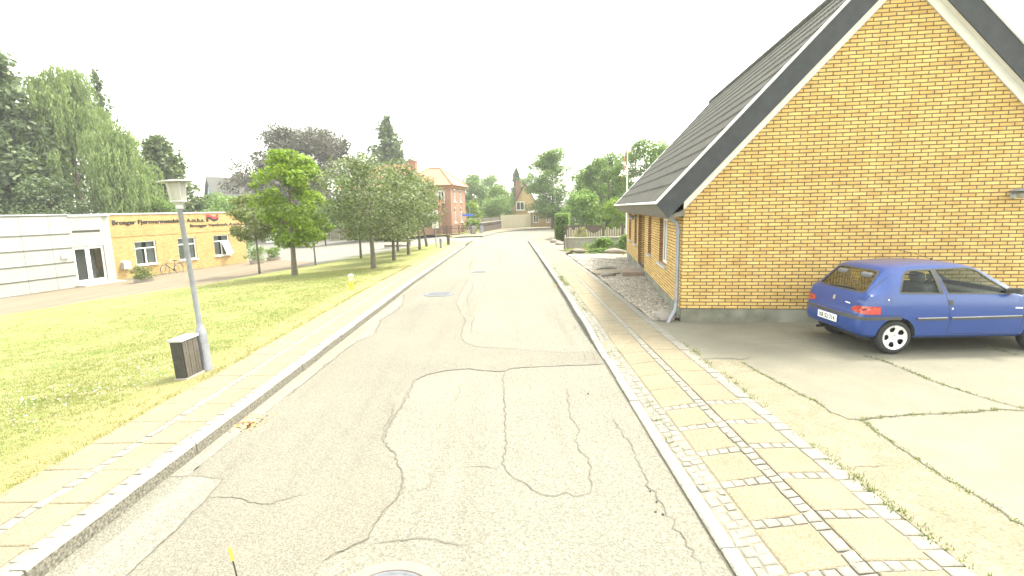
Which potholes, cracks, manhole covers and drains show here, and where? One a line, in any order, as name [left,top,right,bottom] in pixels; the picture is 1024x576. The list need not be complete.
crack [612,417,704,570]
manhole cover [350,561,441,576]
crack [323,255,604,561]
